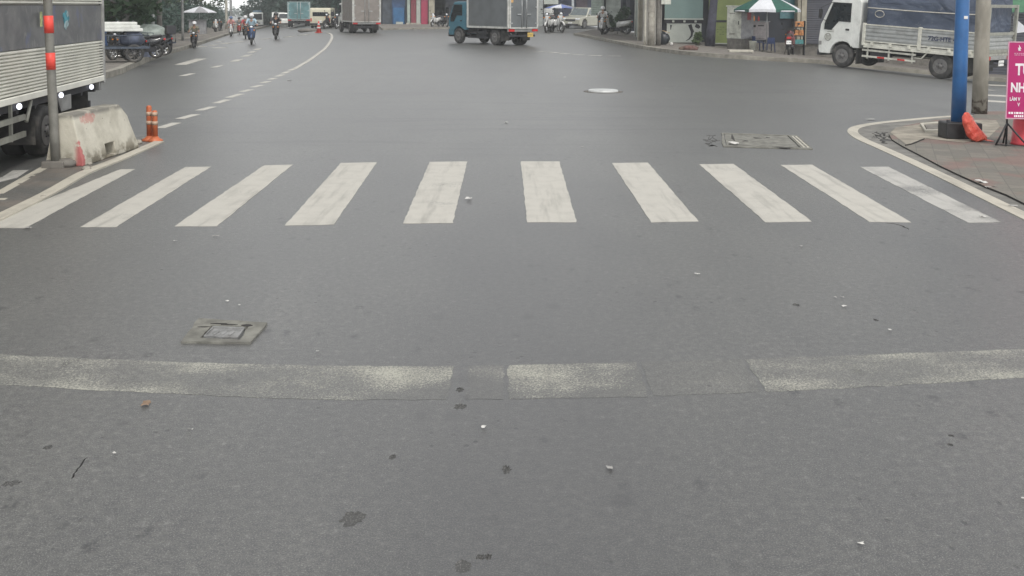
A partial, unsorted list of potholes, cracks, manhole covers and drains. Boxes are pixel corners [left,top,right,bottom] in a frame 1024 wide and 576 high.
manhole cover [721,133,813,150]
crack [872,132,925,146]
manhole cover [181,318,267,345]
crack [703,135,720,147]
